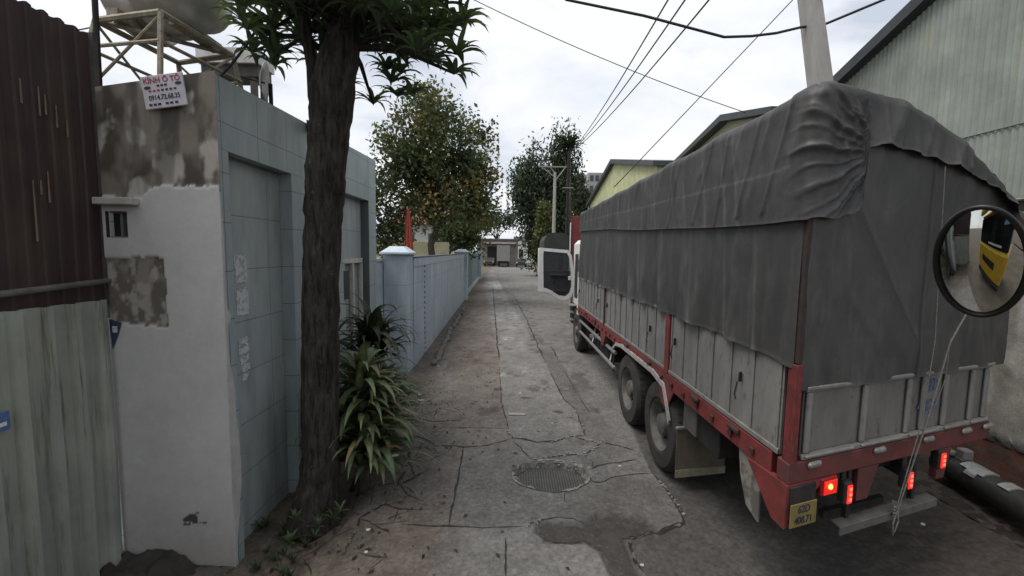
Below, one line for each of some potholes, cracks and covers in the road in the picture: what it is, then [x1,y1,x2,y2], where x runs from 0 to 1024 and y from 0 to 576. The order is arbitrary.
crack [506,410,685,571]
crack [304,394,462,574]
